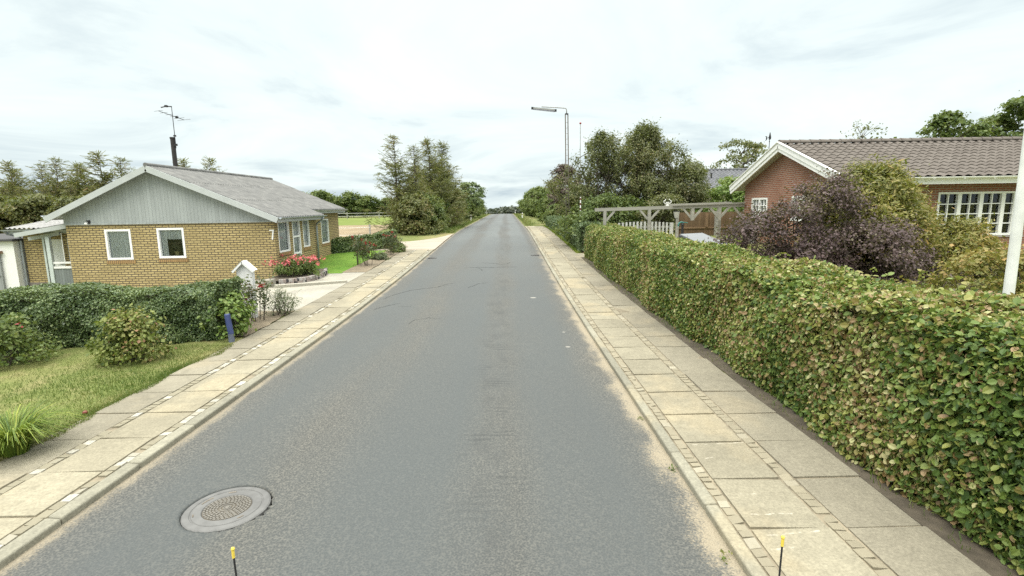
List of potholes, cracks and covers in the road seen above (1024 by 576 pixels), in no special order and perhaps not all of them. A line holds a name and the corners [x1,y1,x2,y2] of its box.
manhole cover [180,487,271,533]
